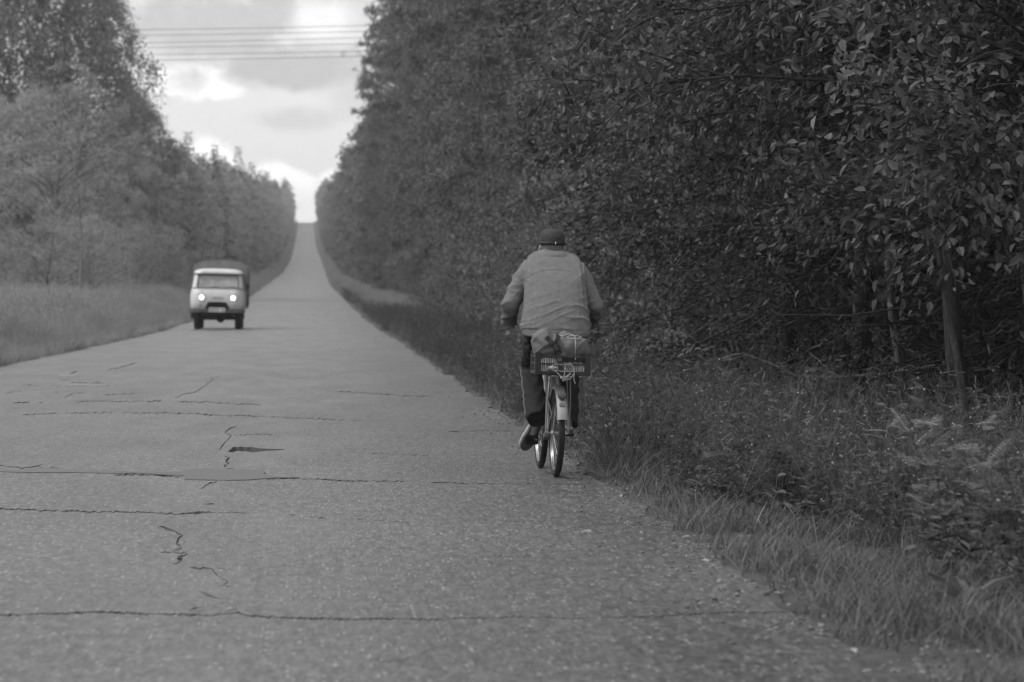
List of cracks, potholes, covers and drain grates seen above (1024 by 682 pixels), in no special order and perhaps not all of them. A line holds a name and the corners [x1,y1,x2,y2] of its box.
crack [0,363,812,621]
